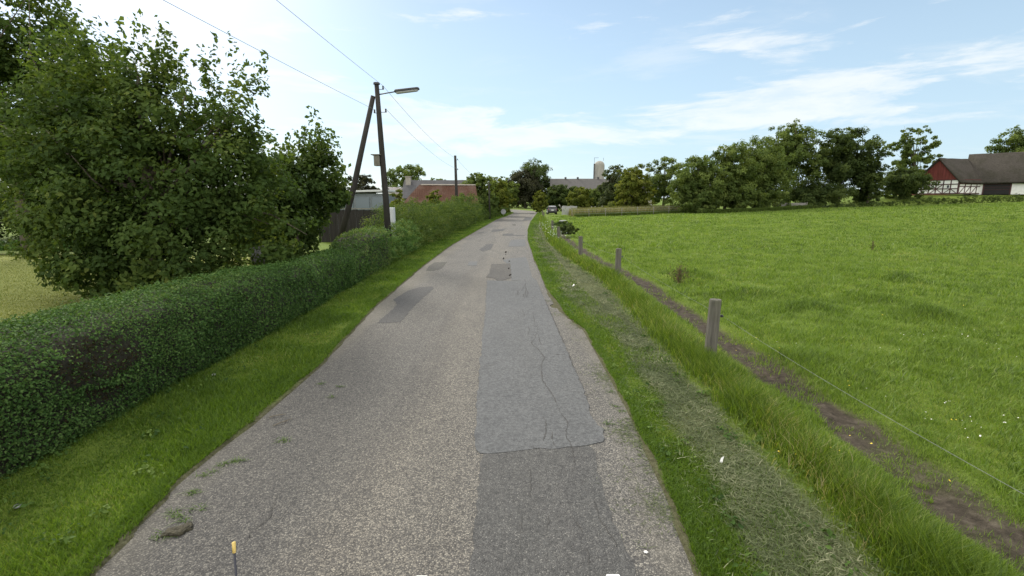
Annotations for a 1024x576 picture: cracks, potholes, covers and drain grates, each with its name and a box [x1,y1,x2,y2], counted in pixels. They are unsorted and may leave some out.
crack [517,283,575,462]
